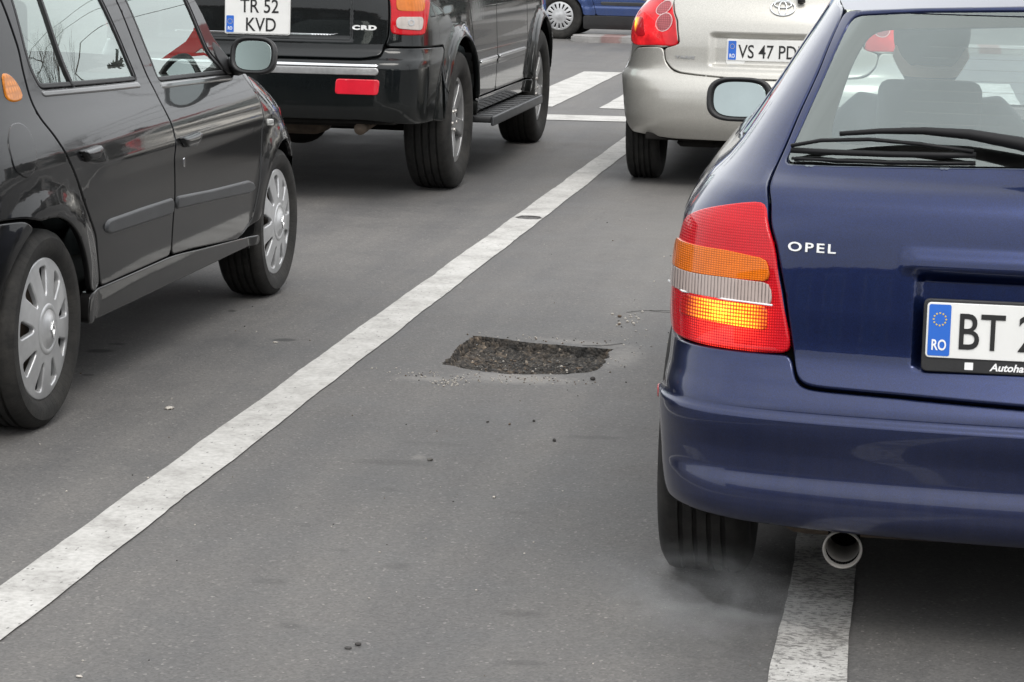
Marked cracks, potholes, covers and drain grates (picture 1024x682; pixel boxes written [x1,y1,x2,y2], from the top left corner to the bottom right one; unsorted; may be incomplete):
pothole [442,336,613,375]
